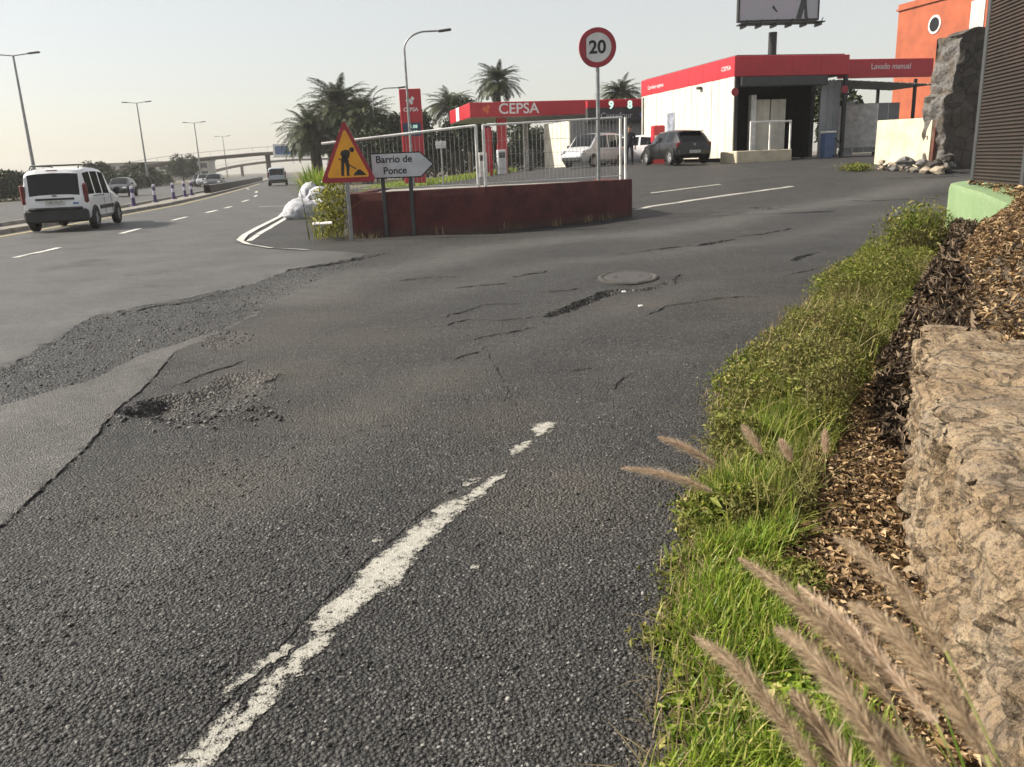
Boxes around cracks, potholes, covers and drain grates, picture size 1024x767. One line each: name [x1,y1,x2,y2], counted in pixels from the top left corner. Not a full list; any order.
pothole [114,371,278,429]
manhole cover [598,270,658,285]
crack [622,245,689,254]
crack [405,271,575,421]
crack [744,228,791,236]
pothole [542,280,672,318]
crack [650,296,753,314]
